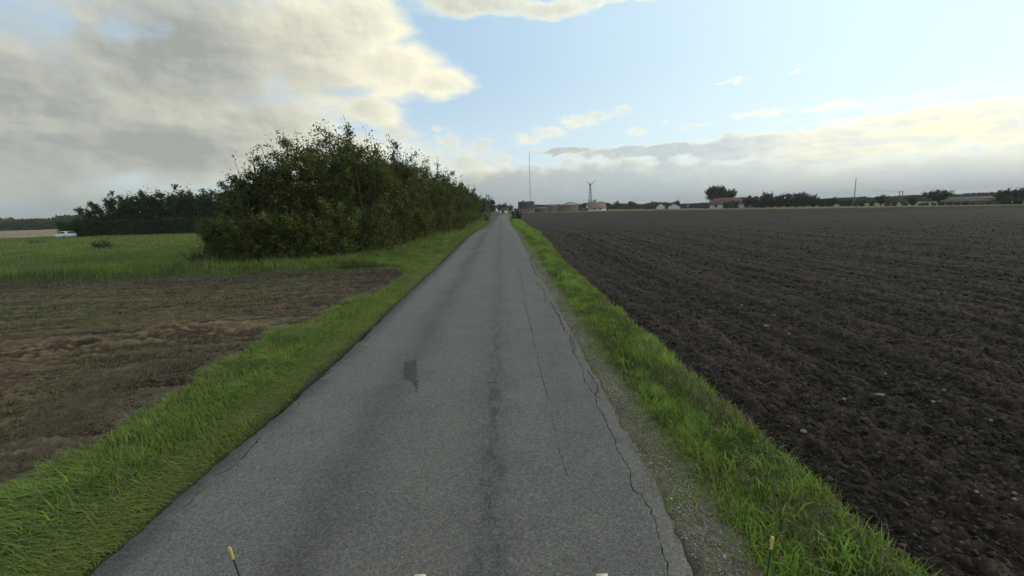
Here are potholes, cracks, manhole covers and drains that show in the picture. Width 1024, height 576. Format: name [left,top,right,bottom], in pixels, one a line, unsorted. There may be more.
crack [172,434,264,515]
crack [519,259,669,575]
